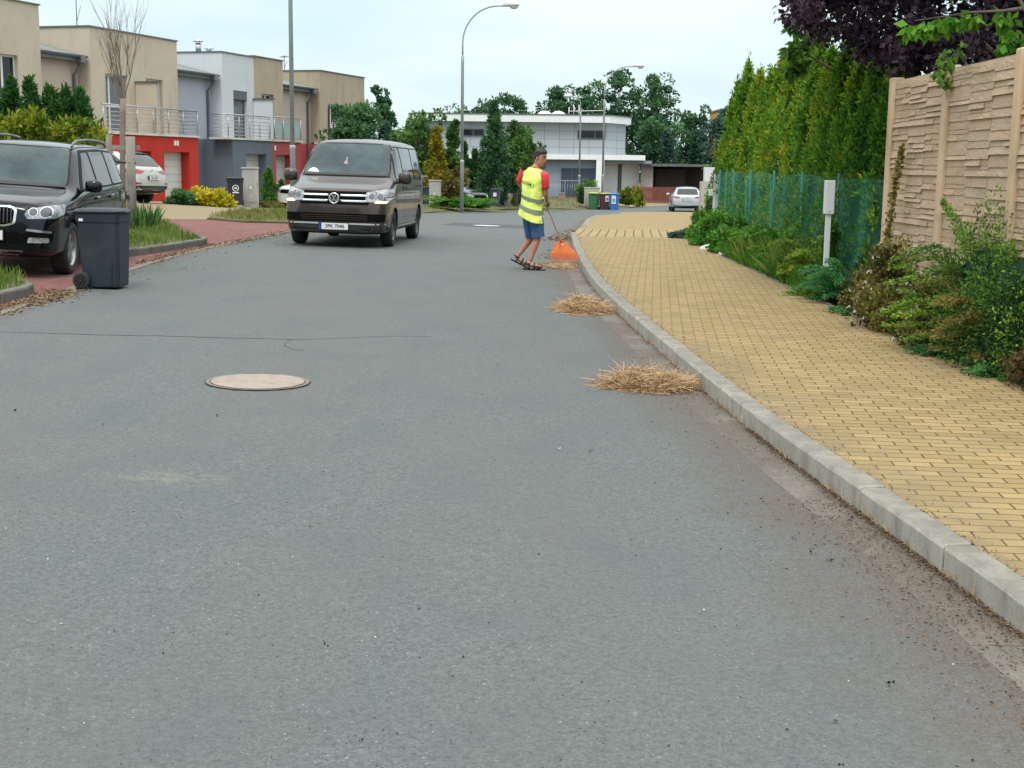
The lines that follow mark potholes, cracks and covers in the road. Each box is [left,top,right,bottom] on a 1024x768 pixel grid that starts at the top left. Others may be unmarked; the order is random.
manhole cover [204,373,311,391]
